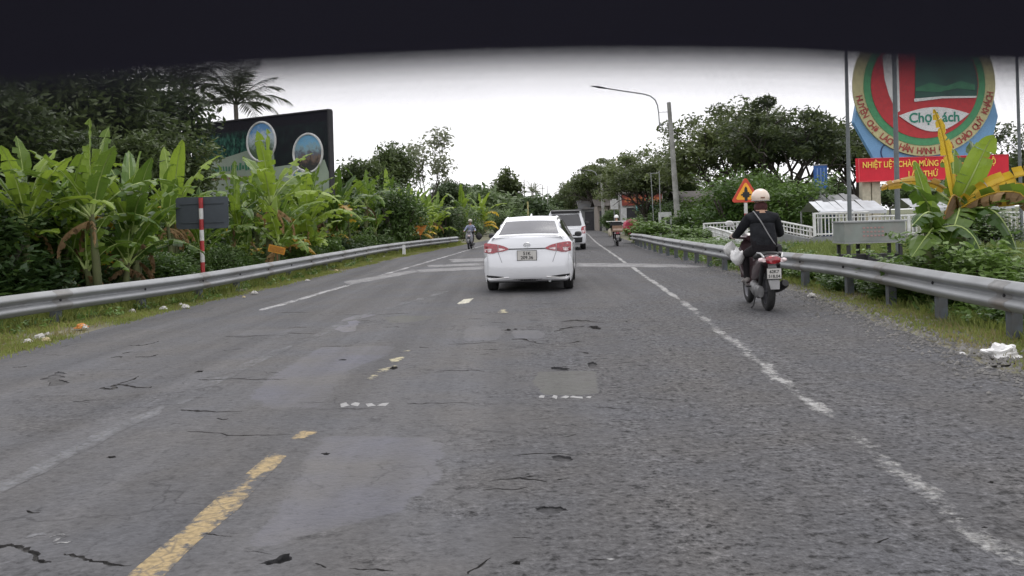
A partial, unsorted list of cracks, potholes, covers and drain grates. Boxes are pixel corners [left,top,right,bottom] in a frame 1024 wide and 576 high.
pothole [260,553,292,565]
crack [73,376,152,402]
crack [485,476,568,490]
crack [182,410,289,436]
crack [0,543,131,566]
